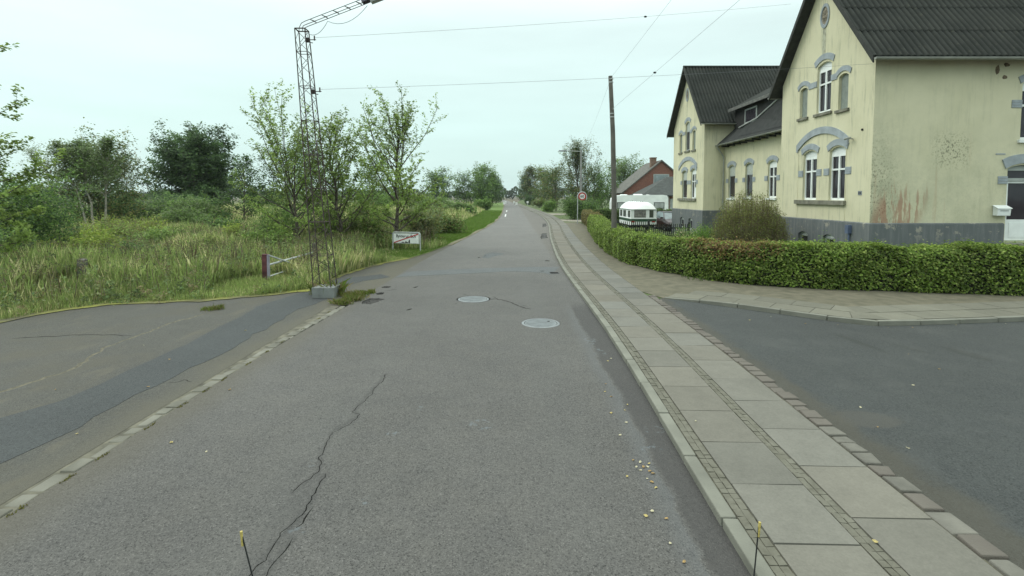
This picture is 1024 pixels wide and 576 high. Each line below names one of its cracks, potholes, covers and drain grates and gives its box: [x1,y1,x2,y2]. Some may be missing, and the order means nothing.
crack [0,314,204,393]
crack [249,374,386,576]
manhole cover [521,318,560,328]
